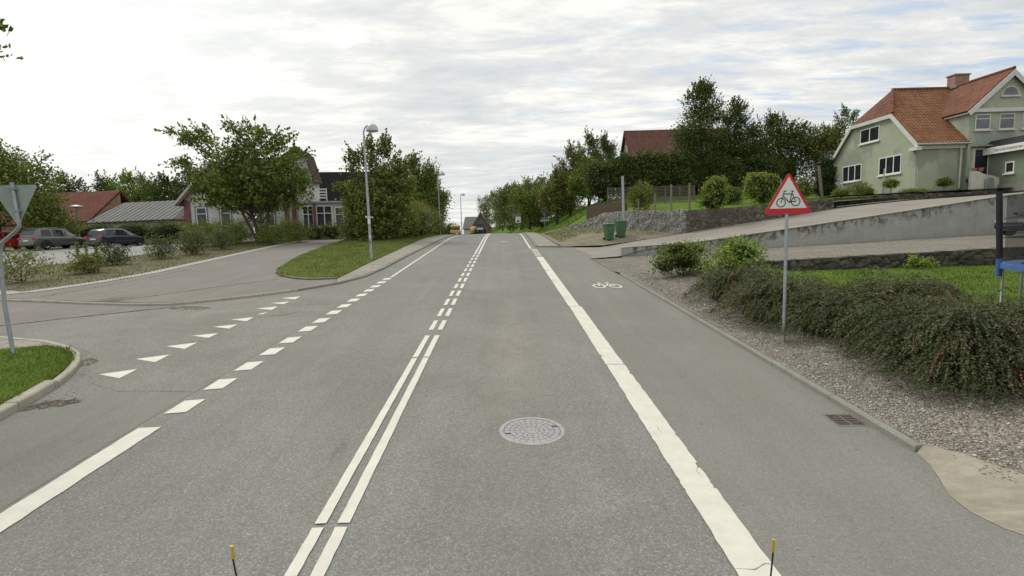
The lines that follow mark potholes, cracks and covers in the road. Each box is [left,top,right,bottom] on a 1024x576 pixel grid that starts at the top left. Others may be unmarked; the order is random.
drain grate [821,414,870,427]
manhole cover [499,417,565,445]
